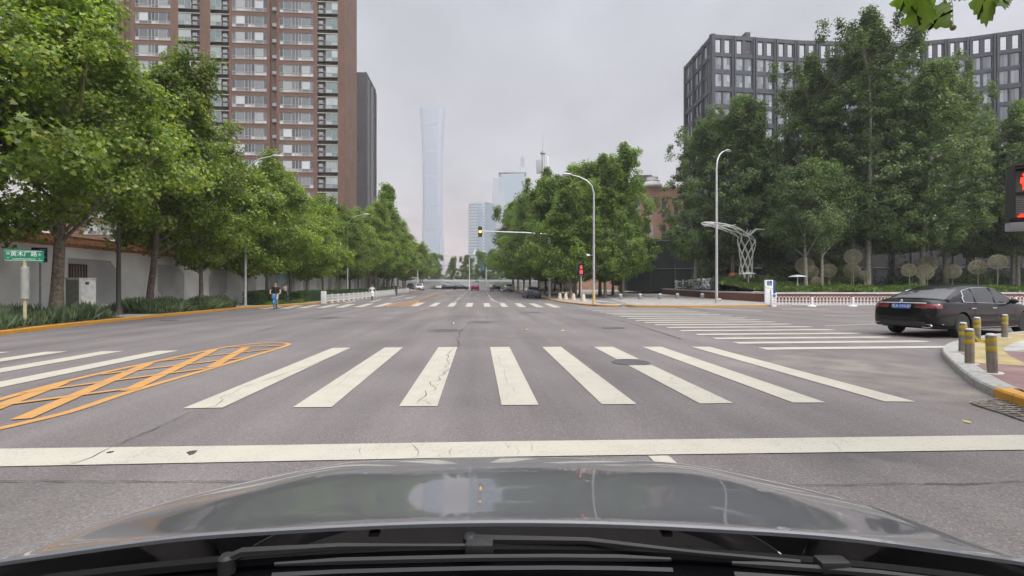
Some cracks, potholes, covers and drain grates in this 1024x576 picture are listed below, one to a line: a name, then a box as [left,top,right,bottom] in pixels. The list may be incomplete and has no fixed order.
drain grate [970,398,1024,422]
